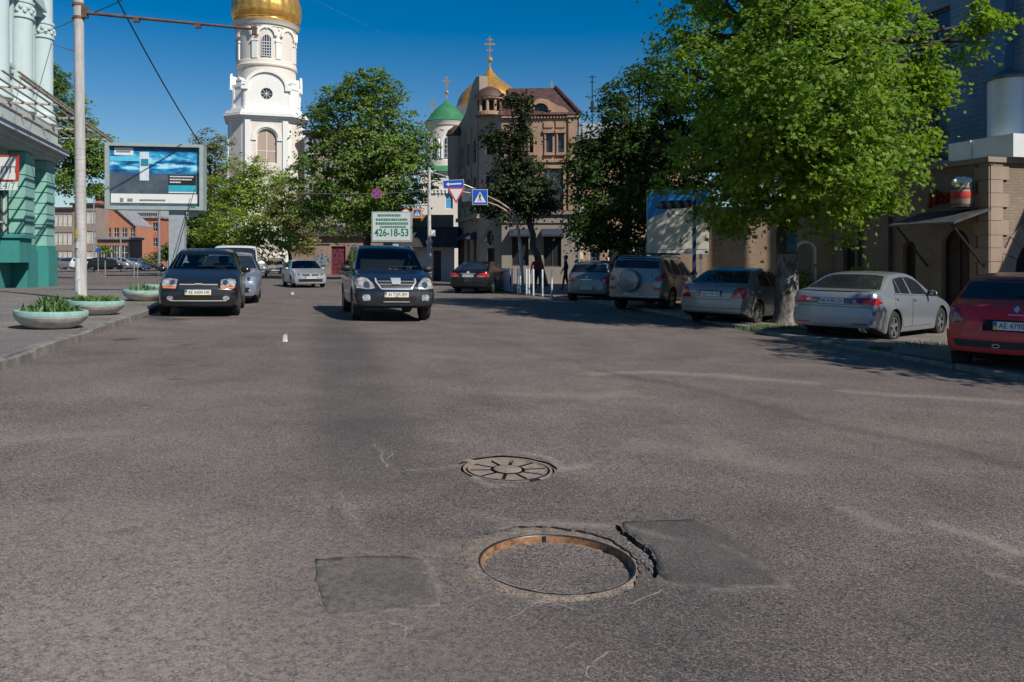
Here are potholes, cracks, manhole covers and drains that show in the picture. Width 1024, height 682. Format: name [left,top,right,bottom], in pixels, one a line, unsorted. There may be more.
crack [585,651,631,679]
crack [373,443,452,472]
manhole cover [459,457,557,482]
crack [329,618,445,672]
manhole cover [459,526,641,602]
crack [502,588,667,622]
crack [339,491,362,534]
